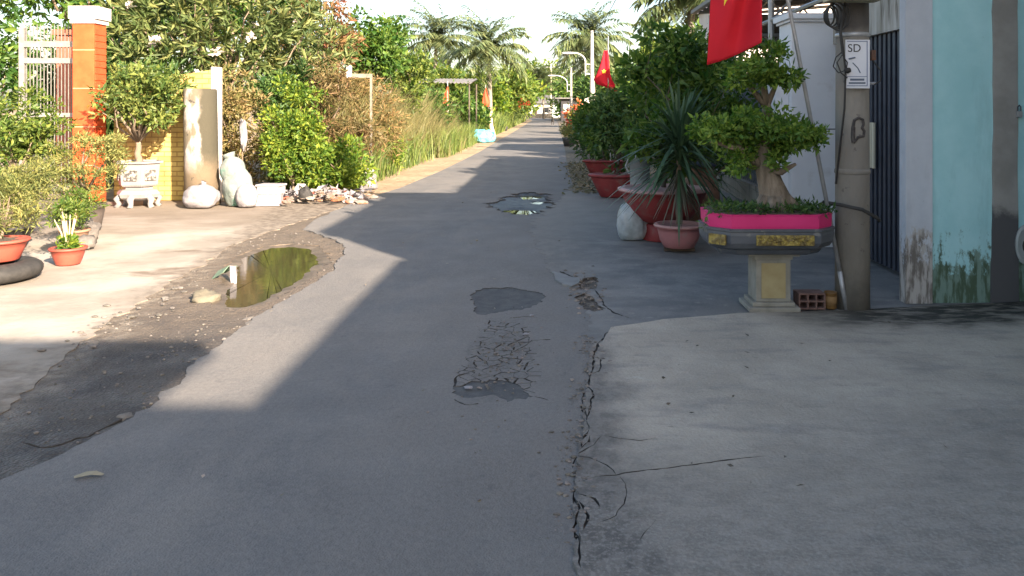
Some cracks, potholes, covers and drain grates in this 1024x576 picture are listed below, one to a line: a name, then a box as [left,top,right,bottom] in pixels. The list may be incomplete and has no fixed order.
pothole [485,192,556,215]
crack [572,435,760,567]
crack [454,316,550,405]
pothole [211,244,332,309]
